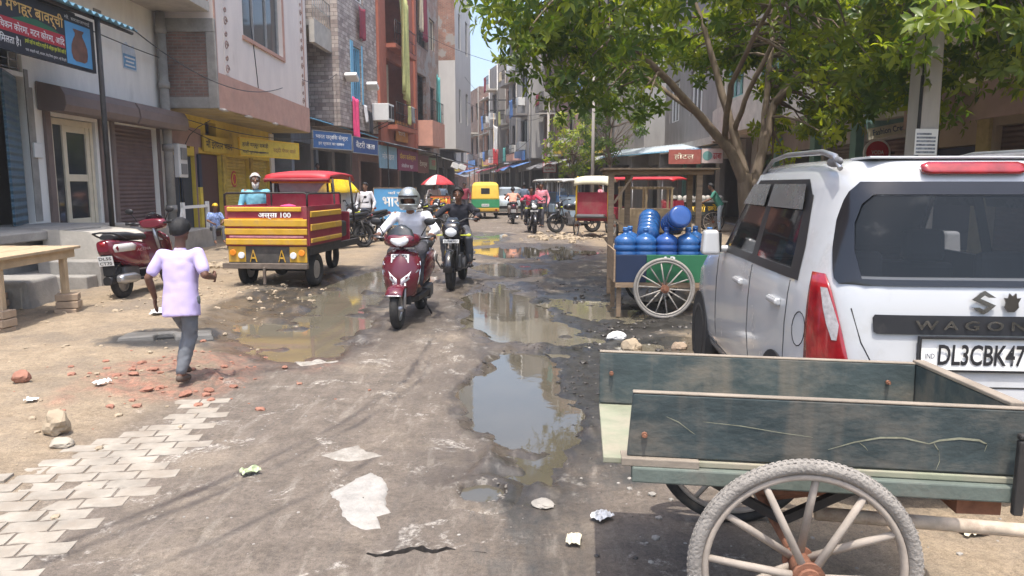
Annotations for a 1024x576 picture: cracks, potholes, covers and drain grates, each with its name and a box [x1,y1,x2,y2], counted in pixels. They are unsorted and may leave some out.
crack [330,539,519,570]
pothole [455,284,555,338]
pothole [439,473,524,515]
pothole [455,345,565,448]
pothole [473,246,605,261]
